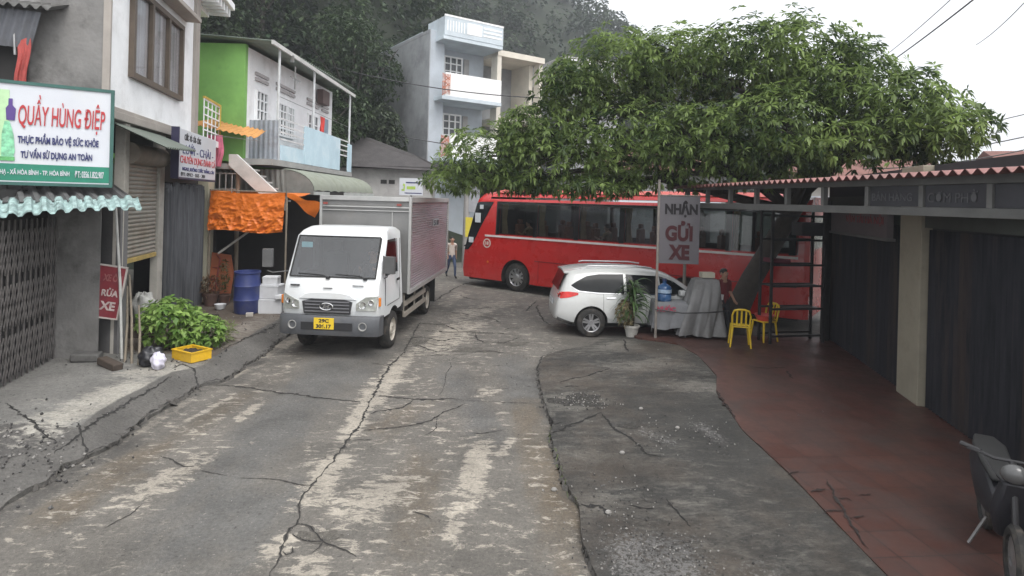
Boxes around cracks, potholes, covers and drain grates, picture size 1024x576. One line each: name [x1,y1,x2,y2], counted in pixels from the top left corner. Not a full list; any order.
pothole [547,393,609,407]
crack [788,471,871,549]
crack [7,403,56,444]
crack [32,282,666,576]
crack [629,498,690,526]
